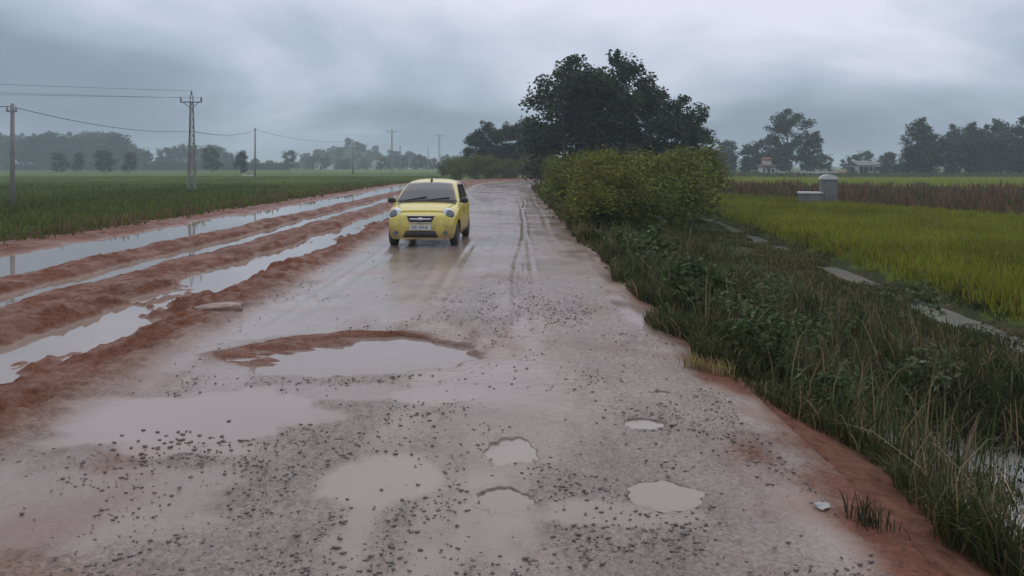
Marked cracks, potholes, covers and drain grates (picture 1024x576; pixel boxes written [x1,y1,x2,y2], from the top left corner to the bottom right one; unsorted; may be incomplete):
pothole [616,415,673,432]
pothole [198,330,497,380]
pothole [474,432,546,469]
pothole [617,478,715,517]
pothole [468,482,544,518]
